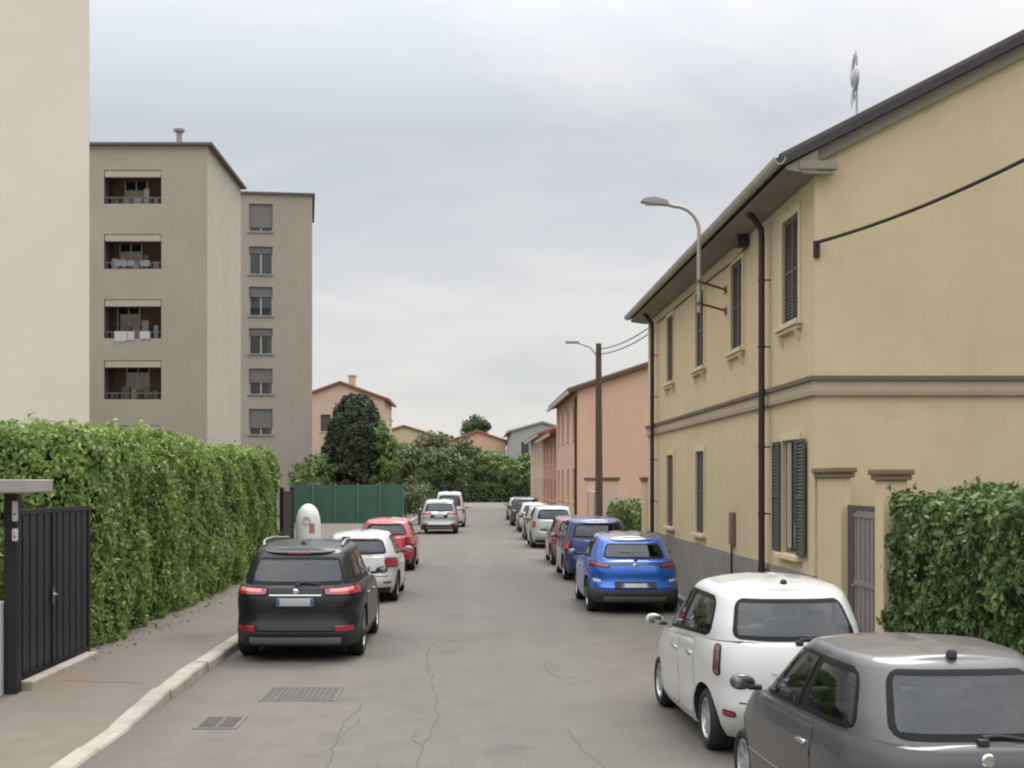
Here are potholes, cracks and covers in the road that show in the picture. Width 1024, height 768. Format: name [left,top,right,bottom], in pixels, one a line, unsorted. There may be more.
crack [567,730,606,768]
crack [325,703,362,768]
drain grate [192,716,248,729]
crack [411,639,471,768]
